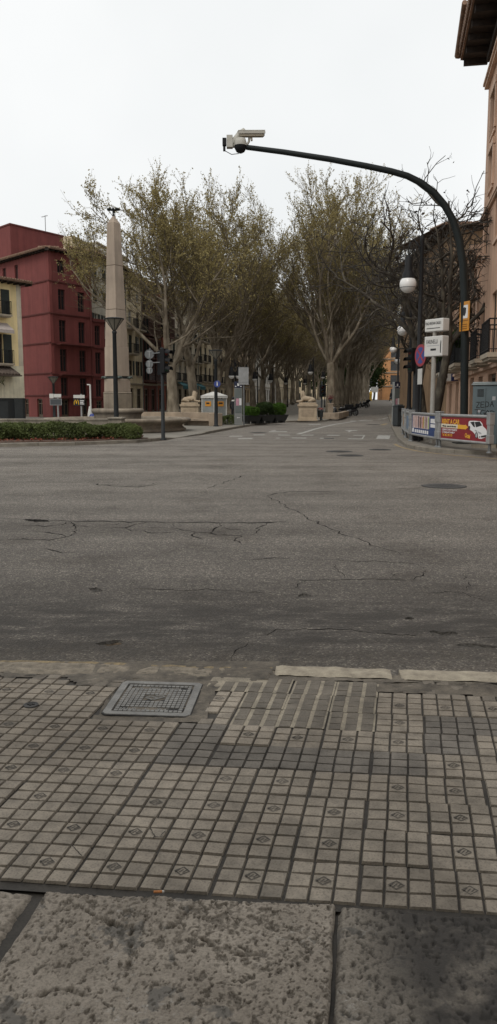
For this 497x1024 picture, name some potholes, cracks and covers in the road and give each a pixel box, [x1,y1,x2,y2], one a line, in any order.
manhole cover [101,681,203,718]
crack [231,628,423,661]
crack [22,497,482,600]
